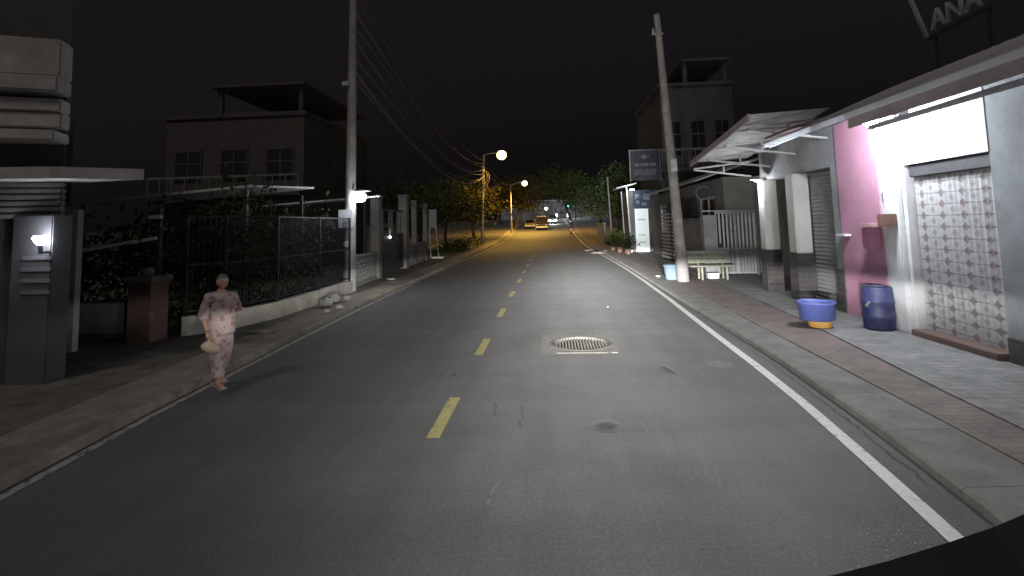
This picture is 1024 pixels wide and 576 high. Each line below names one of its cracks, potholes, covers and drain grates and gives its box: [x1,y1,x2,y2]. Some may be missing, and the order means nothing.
pothole [589,418,625,432]
